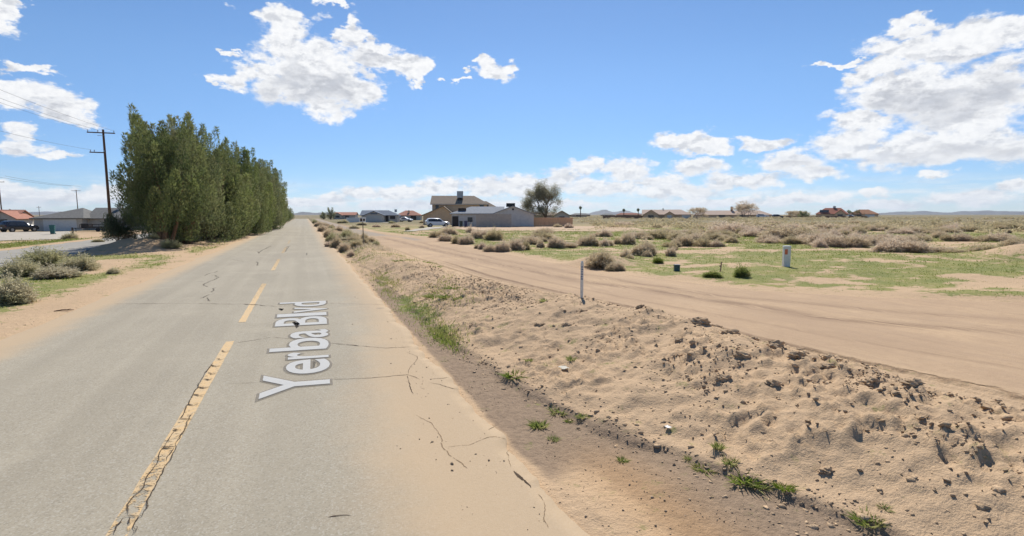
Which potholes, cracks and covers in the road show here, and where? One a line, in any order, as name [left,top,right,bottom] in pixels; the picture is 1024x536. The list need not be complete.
crack [418,416,548,526]
crack [143,259,390,306]
